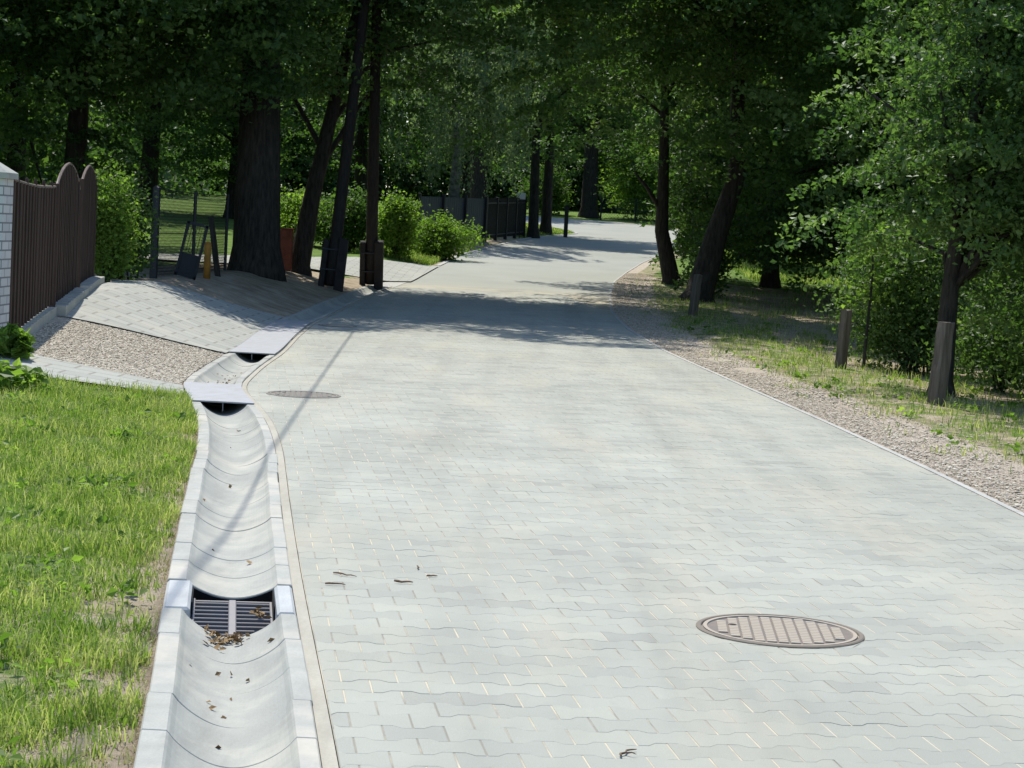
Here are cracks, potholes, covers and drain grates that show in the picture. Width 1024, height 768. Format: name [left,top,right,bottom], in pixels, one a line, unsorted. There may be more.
drain grate [163,580,296,637]
manhole cover [696,614,865,649]
